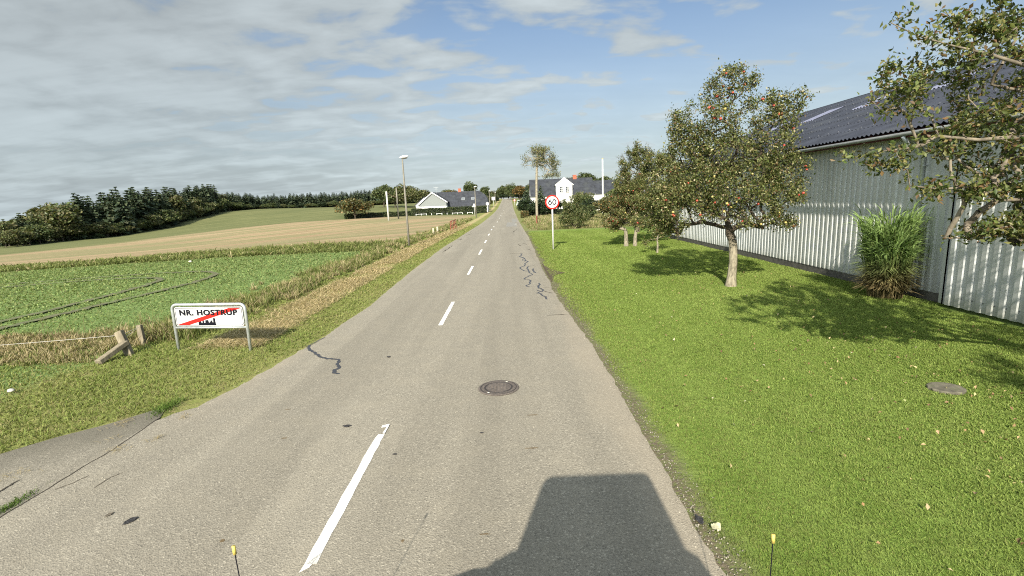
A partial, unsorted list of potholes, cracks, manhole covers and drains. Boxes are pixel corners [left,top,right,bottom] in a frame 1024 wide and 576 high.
manhole cover [478,380,519,396]
